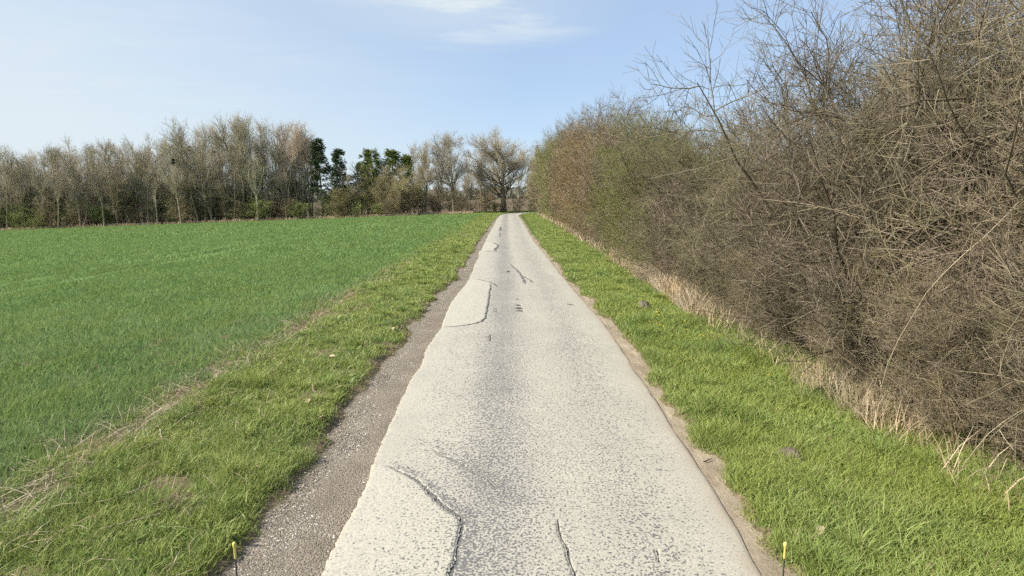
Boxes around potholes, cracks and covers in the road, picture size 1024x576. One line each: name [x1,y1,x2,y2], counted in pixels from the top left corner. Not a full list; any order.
crack [389,449,497,576]
crack [448,227,534,341]
crack [556,519,576,576]
